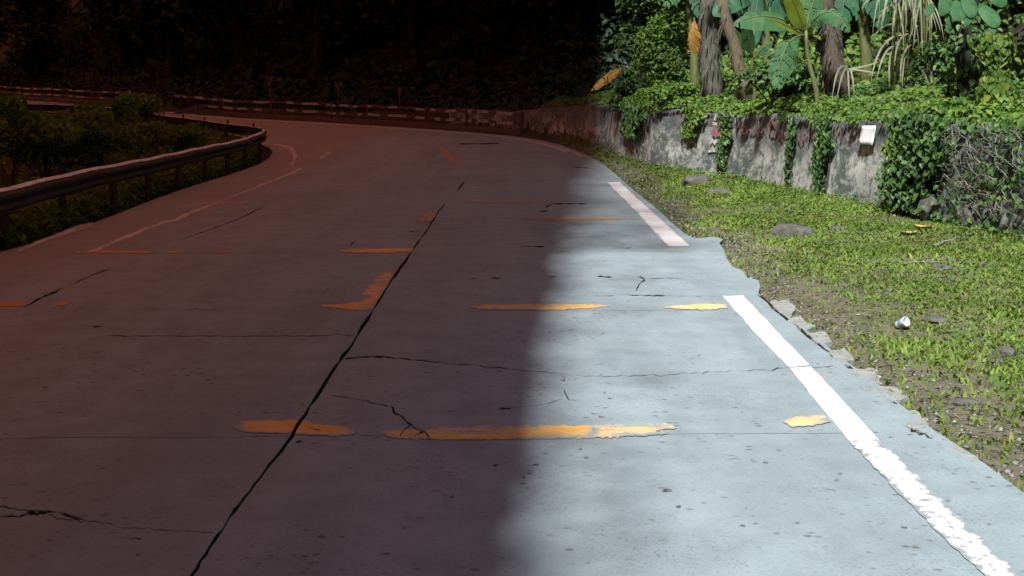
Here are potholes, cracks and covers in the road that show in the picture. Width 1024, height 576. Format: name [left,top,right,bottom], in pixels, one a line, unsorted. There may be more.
crack [28,270,107,306]
crack [336,396,429,438]
crack [5,507,163,540]
crack [341,296,853,379]
crack [630,277,701,297]
